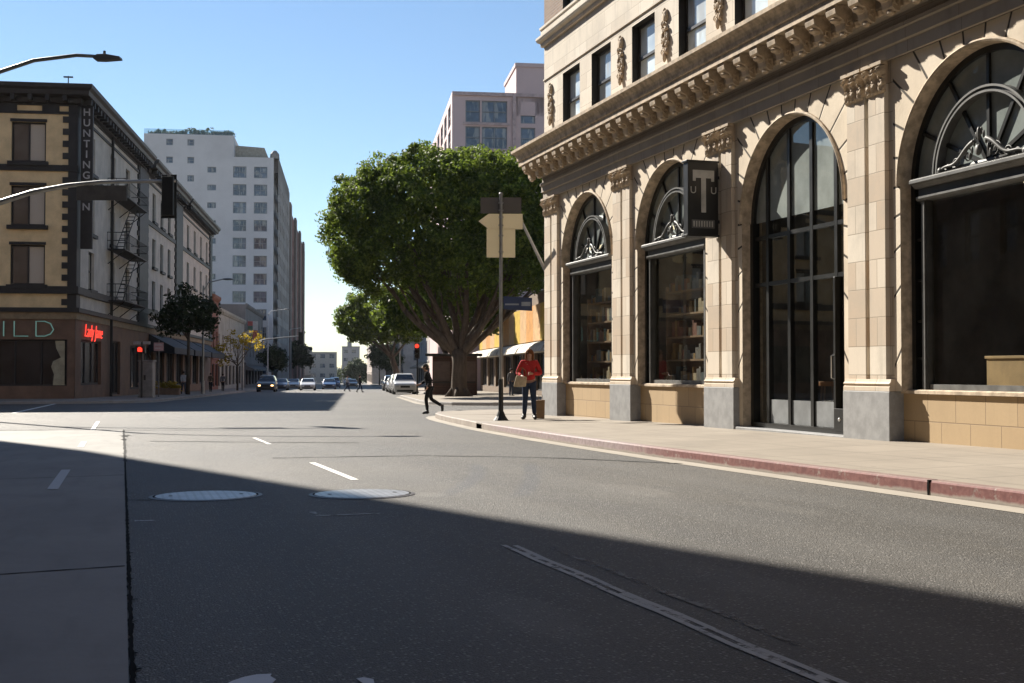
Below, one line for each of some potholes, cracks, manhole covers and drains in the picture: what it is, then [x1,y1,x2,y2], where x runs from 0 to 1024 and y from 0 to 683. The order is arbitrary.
manhole cover [149,490,263,501]
manhole cover [309,489,415,499]
